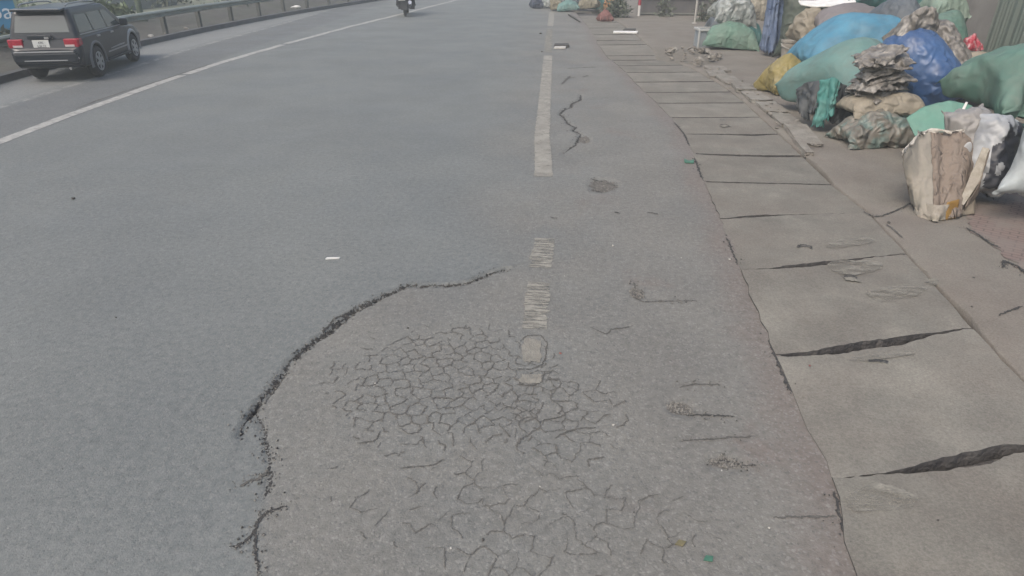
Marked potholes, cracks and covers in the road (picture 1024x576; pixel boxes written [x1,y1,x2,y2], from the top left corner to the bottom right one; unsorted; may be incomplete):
crack [318,323,629,469]
crack [224,264,511,576]
crack [559,67,590,152]
crack [629,280,695,304]
crack [329,455,723,576]
pothole [707,456,743,468]
crack [676,379,762,478]
